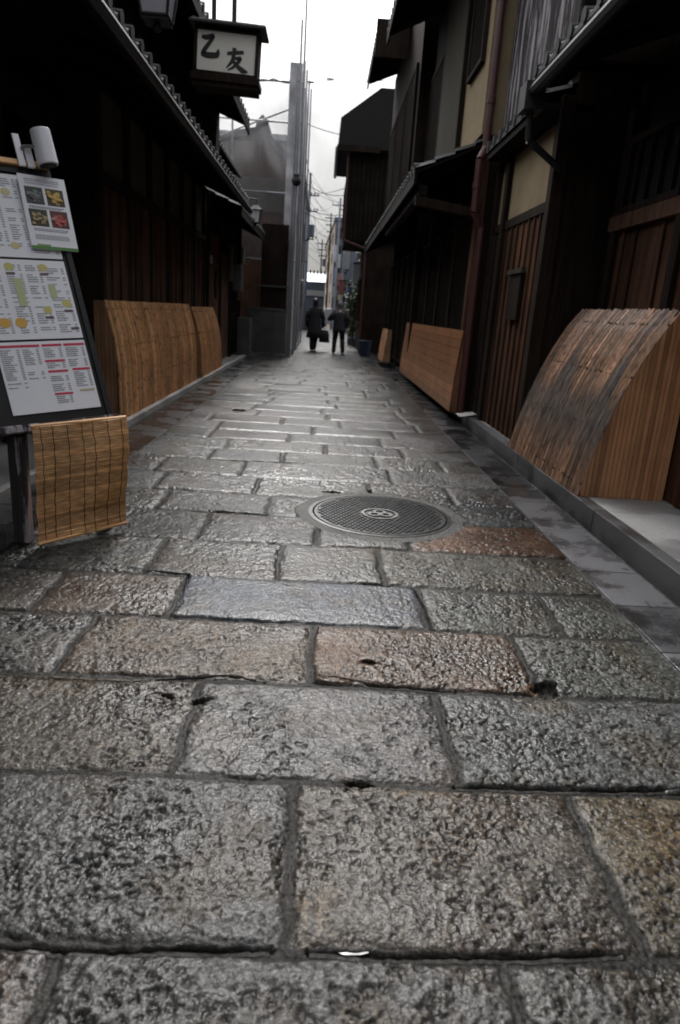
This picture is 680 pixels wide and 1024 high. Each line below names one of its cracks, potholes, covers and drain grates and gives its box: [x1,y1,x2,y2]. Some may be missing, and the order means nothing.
manhole cover [308,495,452,538]
pothole [525,678,564,701]
pothole [186,695,221,708]
pothole [353,657,389,667]
